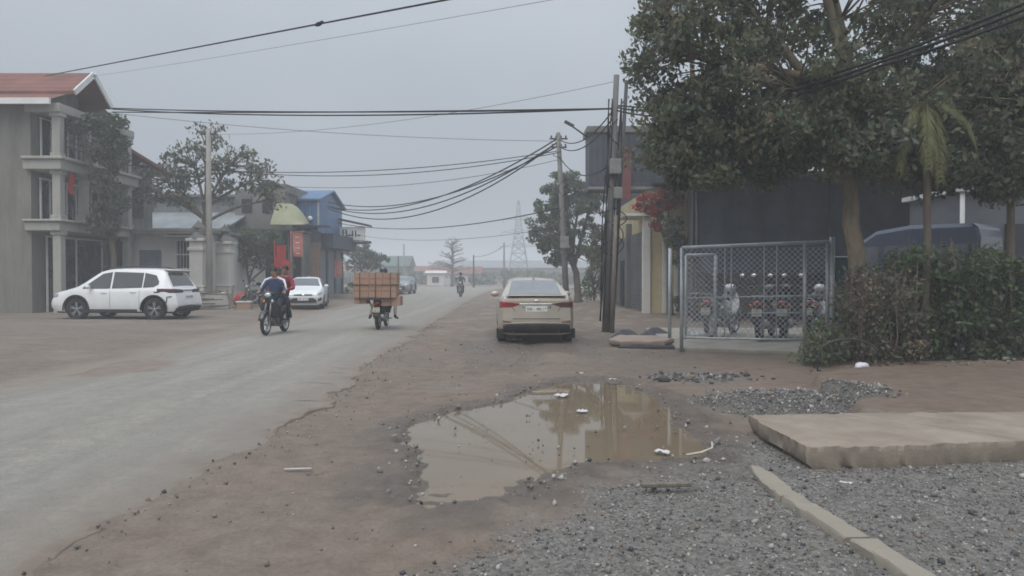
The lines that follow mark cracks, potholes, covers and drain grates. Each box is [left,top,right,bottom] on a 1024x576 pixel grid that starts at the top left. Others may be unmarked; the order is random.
pothole [334,375,769,529]
